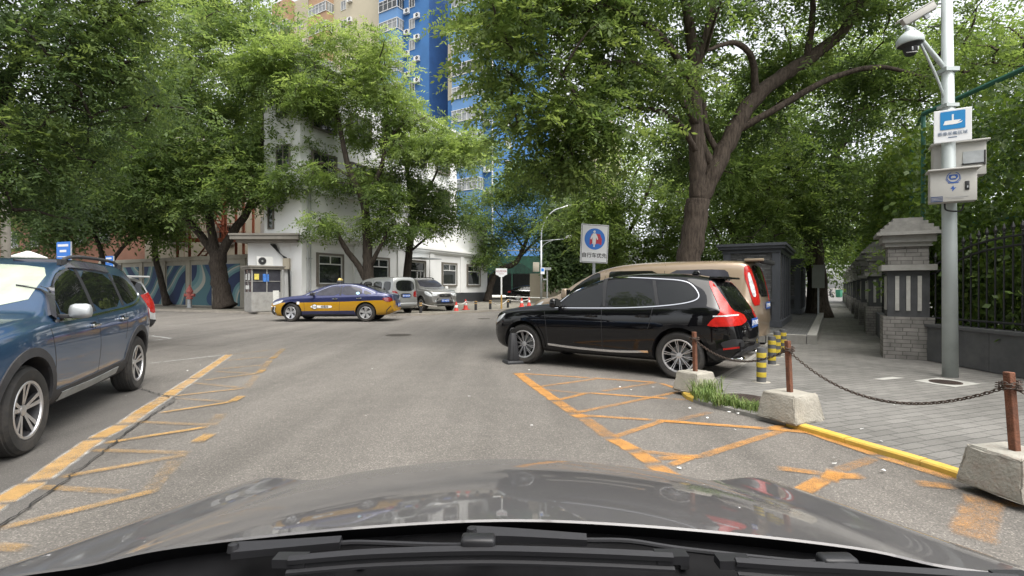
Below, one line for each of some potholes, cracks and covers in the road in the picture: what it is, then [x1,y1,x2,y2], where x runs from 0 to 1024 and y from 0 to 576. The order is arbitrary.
manhole cover [915,378,979,387]
